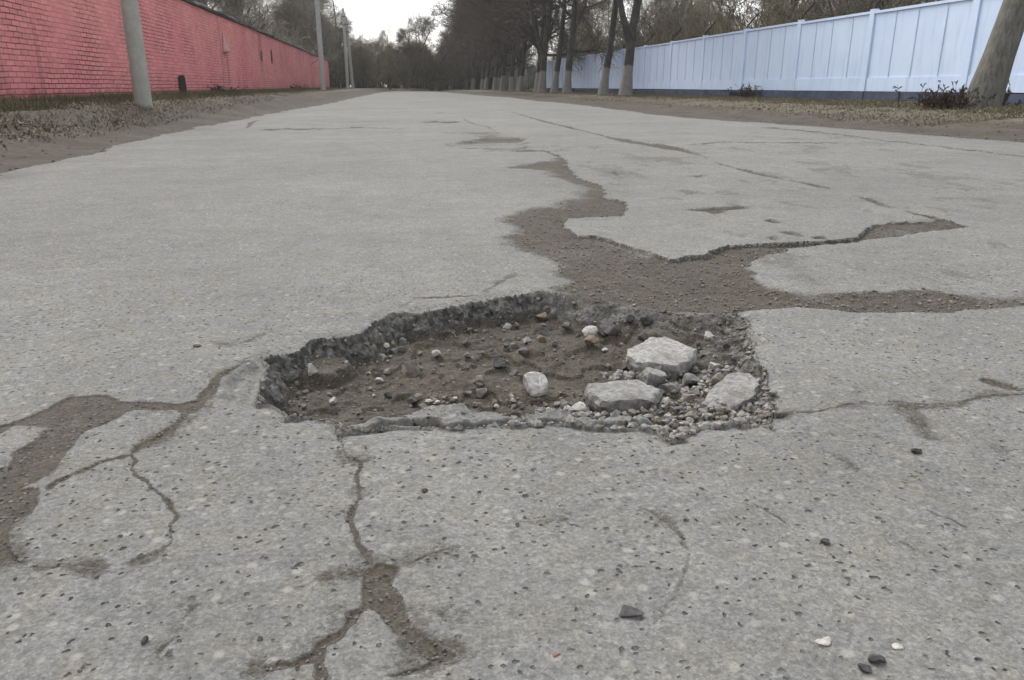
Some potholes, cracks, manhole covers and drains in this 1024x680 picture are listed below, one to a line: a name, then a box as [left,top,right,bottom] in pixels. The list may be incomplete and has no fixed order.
crack [463,112,1024,219]
pothole [254,289,776,445]
crack [643,508,692,625]
crack [774,377,1024,463]
crack [0,274,514,680]
